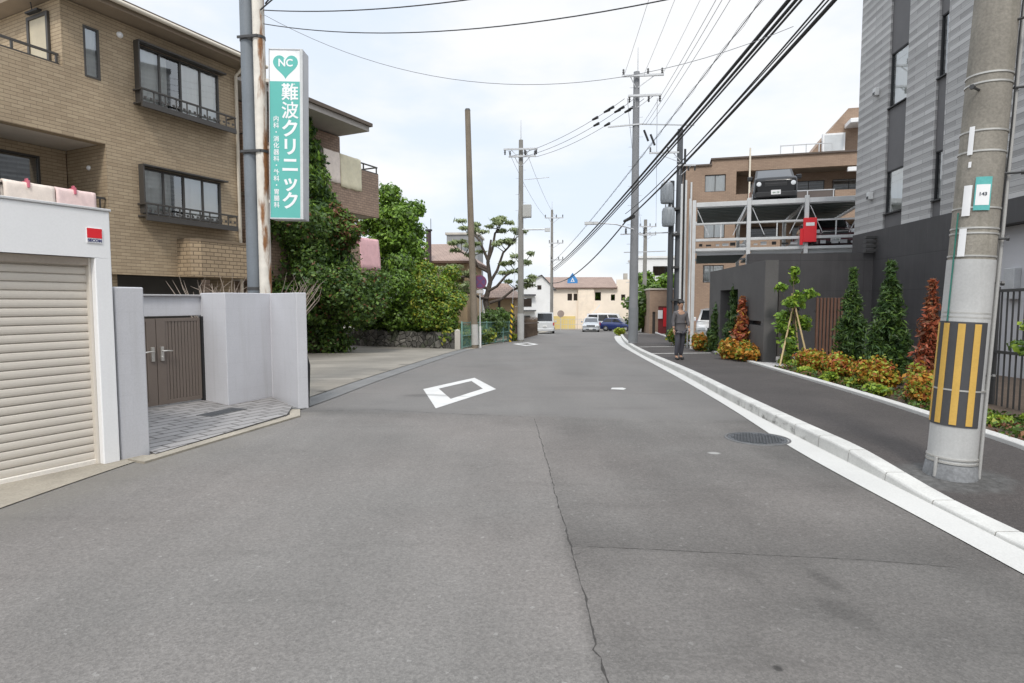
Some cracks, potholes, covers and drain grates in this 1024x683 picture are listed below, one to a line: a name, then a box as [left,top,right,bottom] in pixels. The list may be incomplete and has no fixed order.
crack [534,419,958,683]
manhole cover [724,432,791,446]
